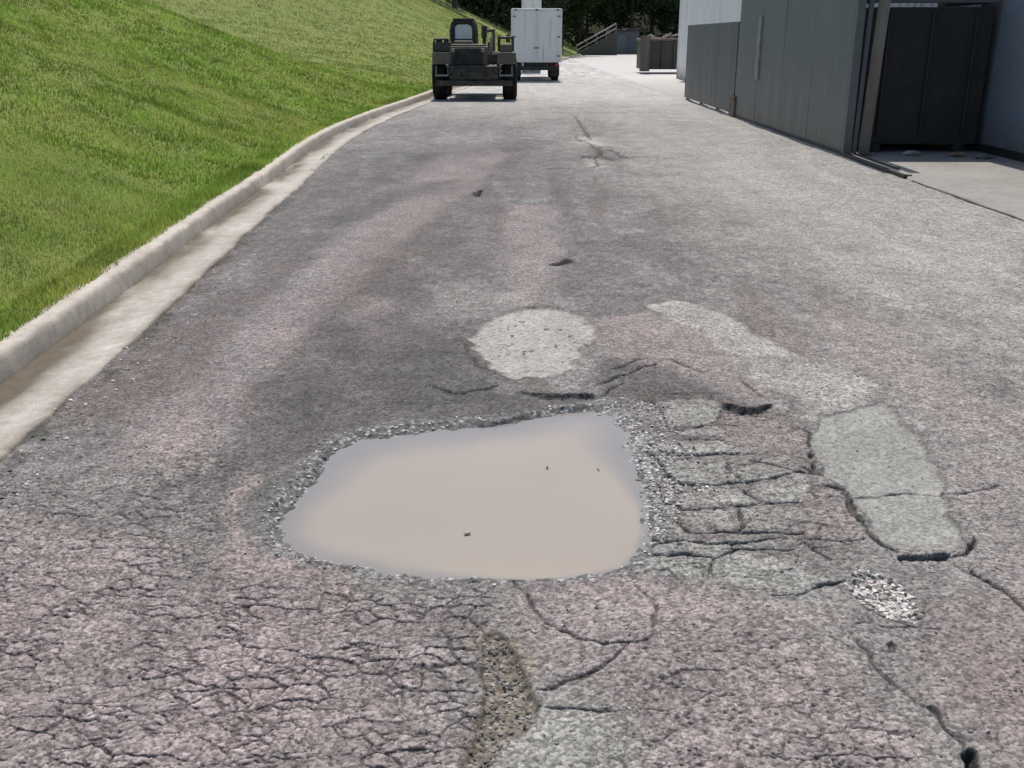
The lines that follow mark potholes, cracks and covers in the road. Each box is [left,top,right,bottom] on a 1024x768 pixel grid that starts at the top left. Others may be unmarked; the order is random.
pothole [460,629,542,768]
crack [975,576,1024,611]
crack [624,632,921,768]
crack [861,647,962,745]
crack [526,598,658,713]
crack [0,451,492,768]
crack [637,383,993,591]
pothole [719,403,773,417]
pothole [270,405,666,579]
pothole [844,571,923,626]
crack [566,112,651,168]
